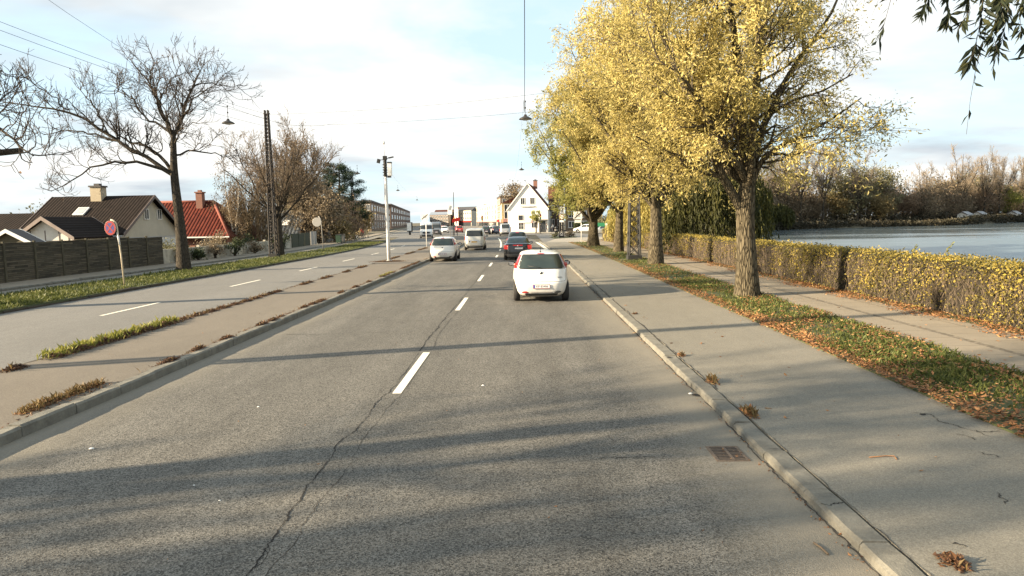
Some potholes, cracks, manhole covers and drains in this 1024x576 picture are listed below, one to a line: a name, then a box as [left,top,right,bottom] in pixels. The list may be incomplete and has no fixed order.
crack [246,313,457,576]
drain grate [705,446,751,462]
crack [913,412,999,457]
